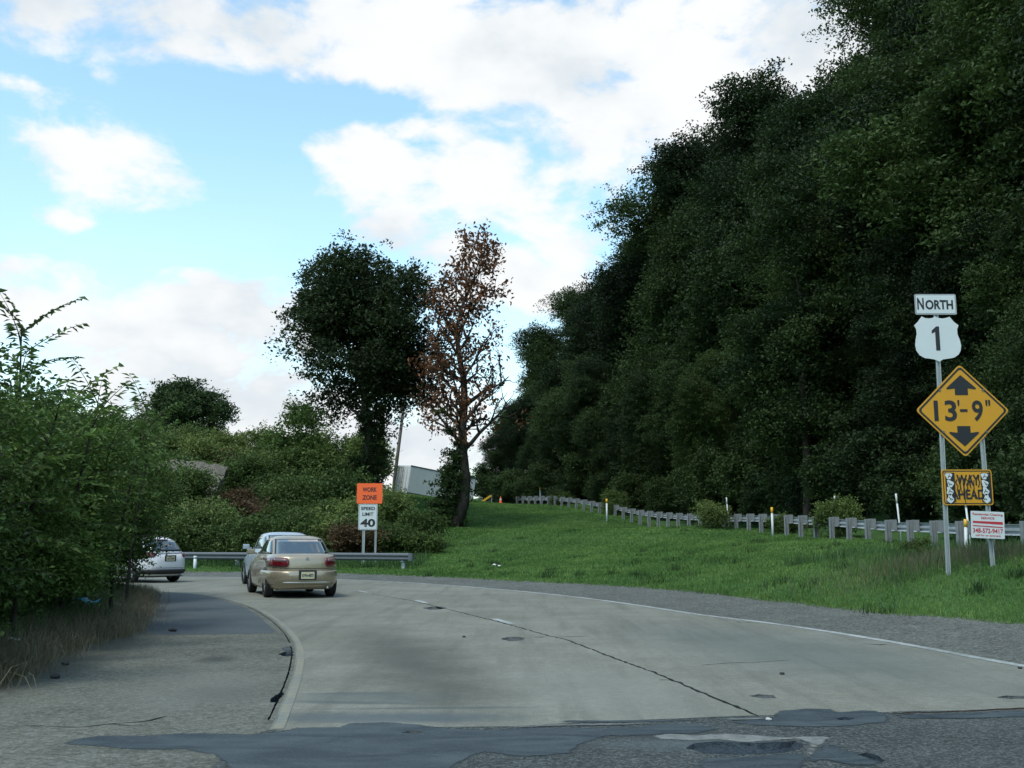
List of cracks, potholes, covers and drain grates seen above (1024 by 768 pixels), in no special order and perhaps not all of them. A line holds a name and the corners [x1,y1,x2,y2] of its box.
crack [32,716,166,728]
pothole [687,741,803,755]
